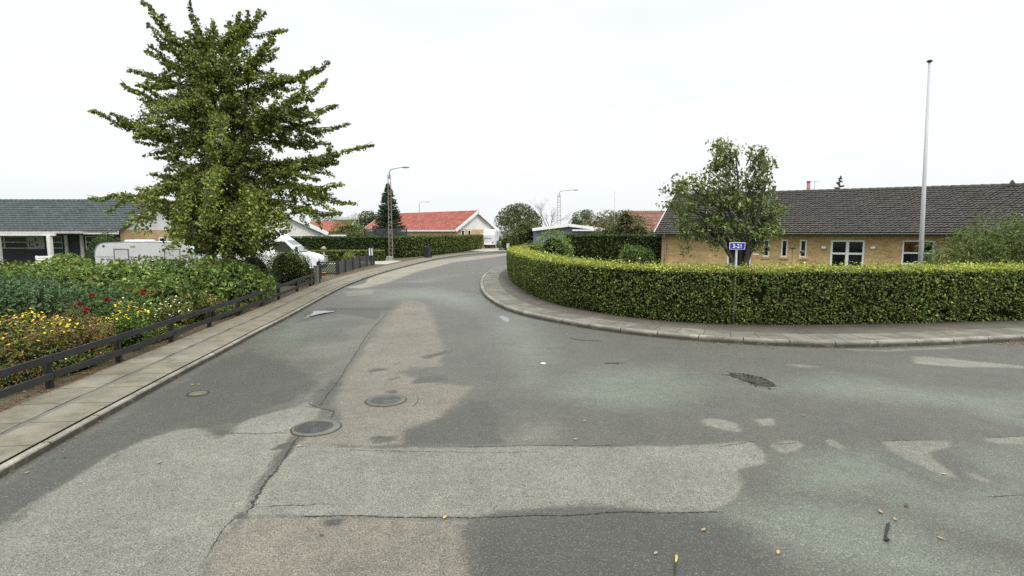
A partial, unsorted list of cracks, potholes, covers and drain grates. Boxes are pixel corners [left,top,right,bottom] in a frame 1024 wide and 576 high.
manhole cover [365,394,407,407]
manhole cover [290,419,342,437]
pothole [721,371,781,390]
crack [206,432,341,557]
